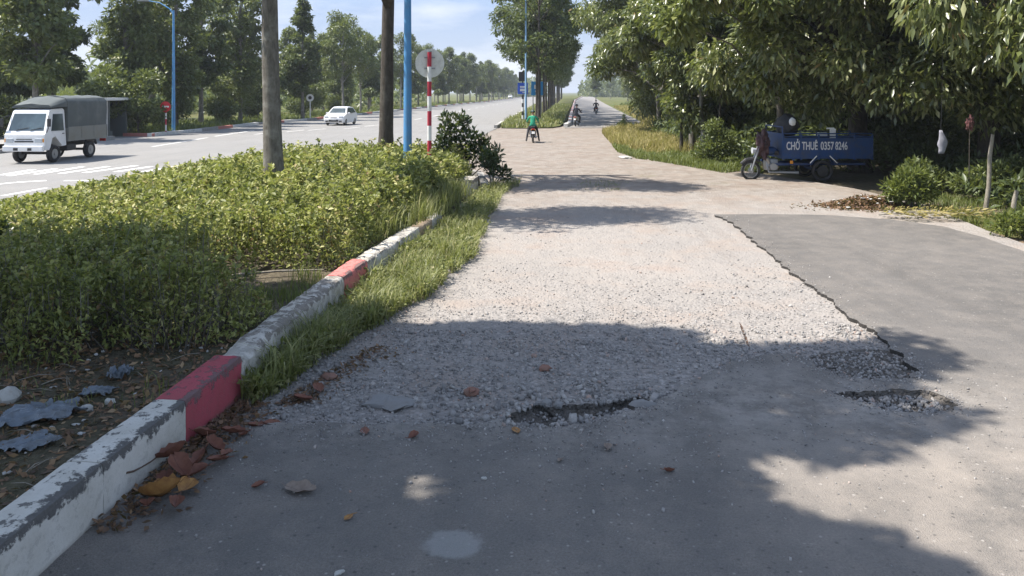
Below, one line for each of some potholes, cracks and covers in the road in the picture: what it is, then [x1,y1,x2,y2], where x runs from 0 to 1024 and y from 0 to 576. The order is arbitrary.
pothole [813,382,974,418]
pothole [490,389,668,430]
pothole [781,343,929,387]
